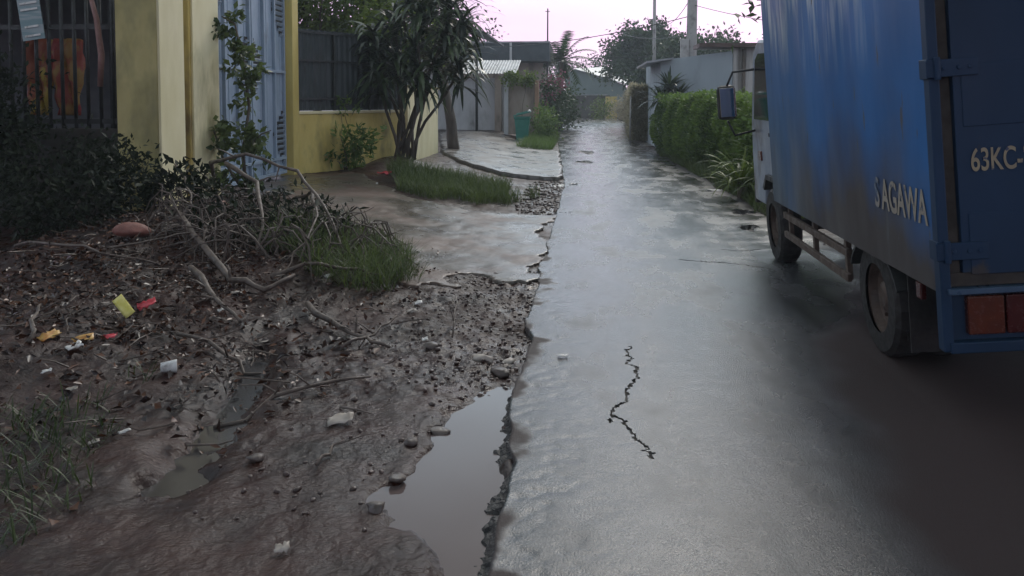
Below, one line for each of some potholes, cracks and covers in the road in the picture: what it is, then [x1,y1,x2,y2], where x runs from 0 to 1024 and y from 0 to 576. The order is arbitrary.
crack [607,349,655,459]
